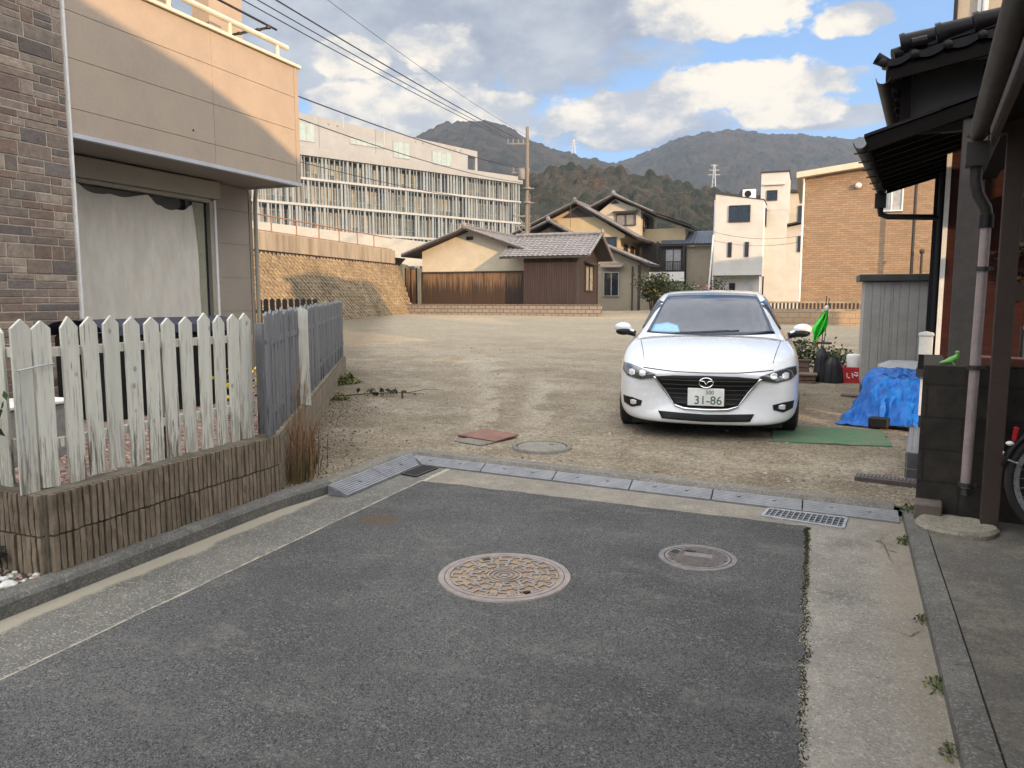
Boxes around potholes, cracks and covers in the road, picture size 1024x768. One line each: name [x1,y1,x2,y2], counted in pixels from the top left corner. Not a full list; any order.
drain grate [761,507,848,529]
manhole cover [658,544,738,572]
manhole cover [512,441,572,455]
drain grate [402,465,438,477]
manhole cover [438,553,571,603]
